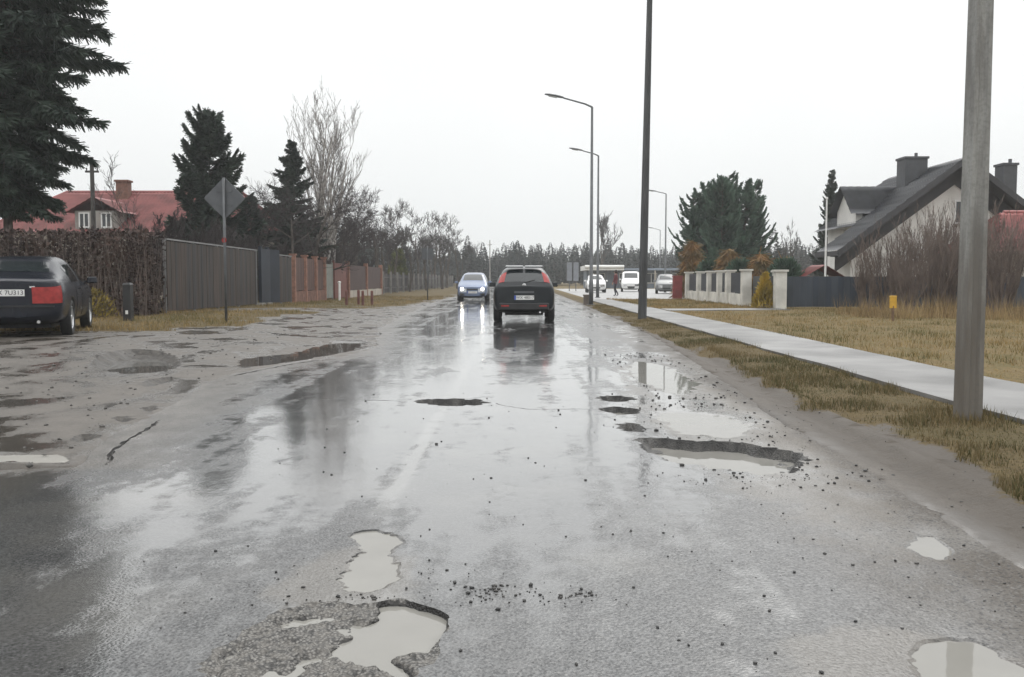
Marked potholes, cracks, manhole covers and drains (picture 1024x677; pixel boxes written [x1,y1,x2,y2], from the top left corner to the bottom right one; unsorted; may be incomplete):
pothole [414,398,490,406]
pothole [196,598,450,677]
pothole [906,635,1024,677]
pothole [616,422,646,432]
crack [105,420,160,465]
pothole [88,349,185,374]
pothole [598,406,641,415]
pothole [632,437,812,475]
pothole [335,529,406,595]
pothole [904,535,955,560]
